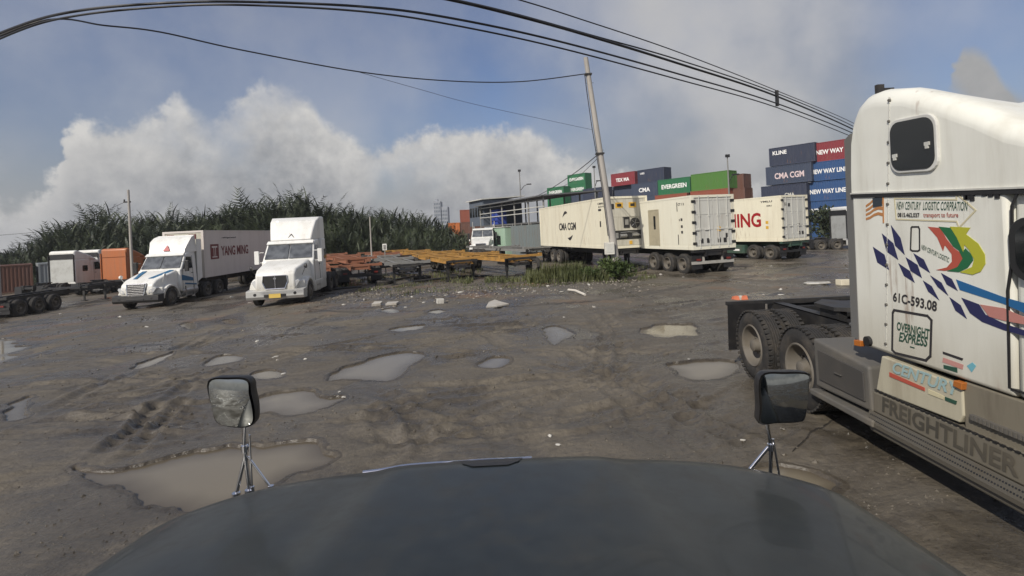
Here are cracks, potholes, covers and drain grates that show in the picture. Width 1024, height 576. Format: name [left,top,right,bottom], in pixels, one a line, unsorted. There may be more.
pothole [323,350,430,382]
pothole [258,387,350,418]
pothole [124,351,177,370]
pothole [0,394,40,423]
pothole [472,355,514,369]
pothole [742,461,851,495]
pothole [384,323,432,333]
pothole [247,368,288,380]
pothole [0,337,41,363]
pothole [64,436,342,516]
pothole [663,358,745,382]
crack [792,416,840,452]
